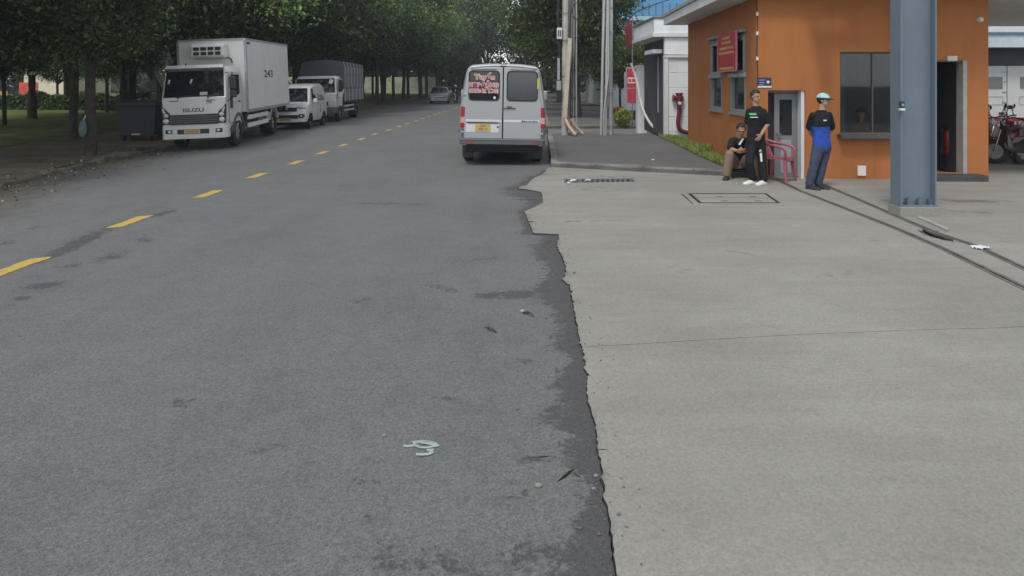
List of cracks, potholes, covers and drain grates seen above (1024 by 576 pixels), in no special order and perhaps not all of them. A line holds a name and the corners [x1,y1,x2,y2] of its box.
manhole cover [682,193,780,204]
